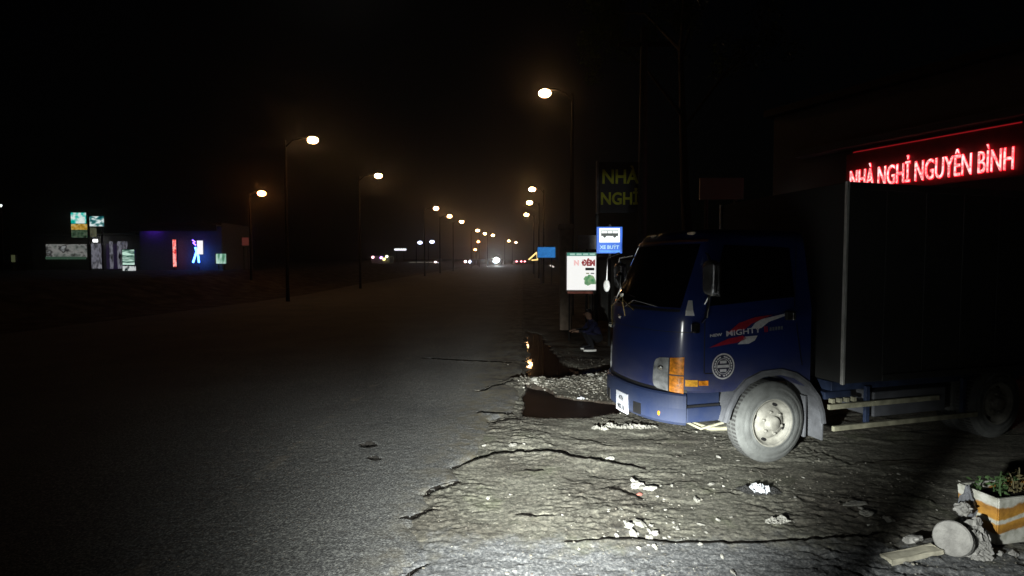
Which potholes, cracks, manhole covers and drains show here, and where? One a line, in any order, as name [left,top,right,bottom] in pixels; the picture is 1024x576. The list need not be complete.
crack [564,532,884,543]
crack [430,358,514,392]
pothole [523,331,610,379]
pothole [521,381,621,419]
crack [400,450,646,520]
